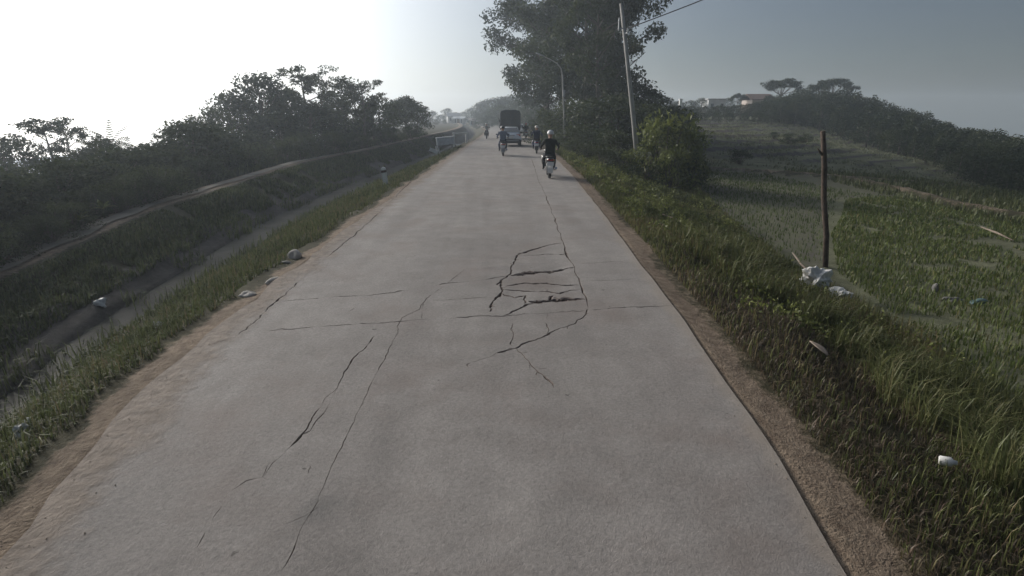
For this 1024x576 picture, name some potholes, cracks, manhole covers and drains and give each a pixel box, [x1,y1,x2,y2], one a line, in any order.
crack [197,243,659,569]
